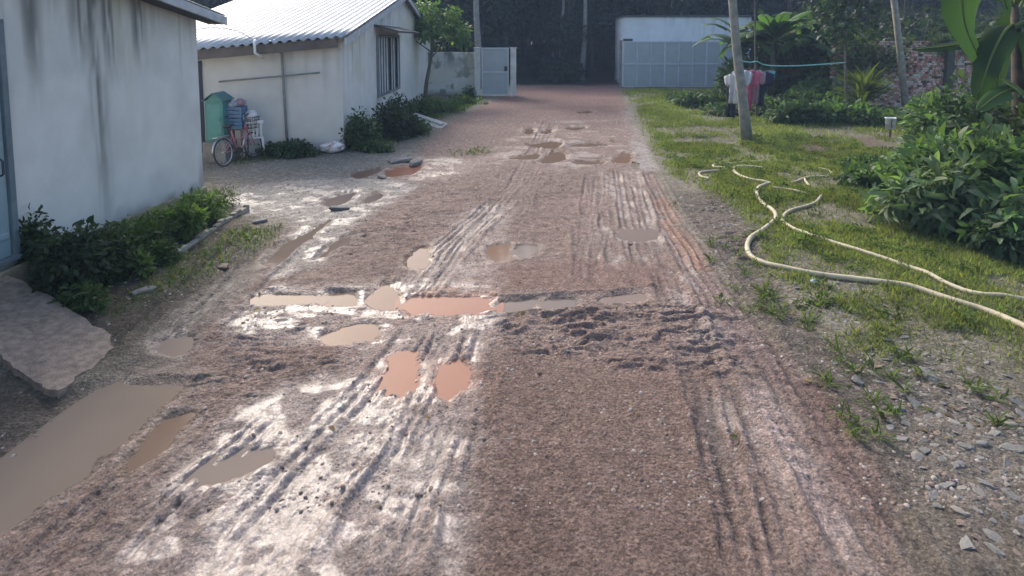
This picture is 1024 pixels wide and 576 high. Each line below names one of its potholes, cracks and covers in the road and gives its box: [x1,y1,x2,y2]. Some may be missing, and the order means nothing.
pothole [510,244,540,258]
pothole [605,227,663,244]
pothole [381,163,426,177]
pothole [394,290,504,317]
pothole [154,334,198,357]
pothole [0,373,211,536]
pothole [484,241,514,262]
pothole [318,322,383,346]
pothole [375,350,423,398]
pothole [185,443,287,493]
pothole [539,150,570,163]
pothole [247,291,329,306]
